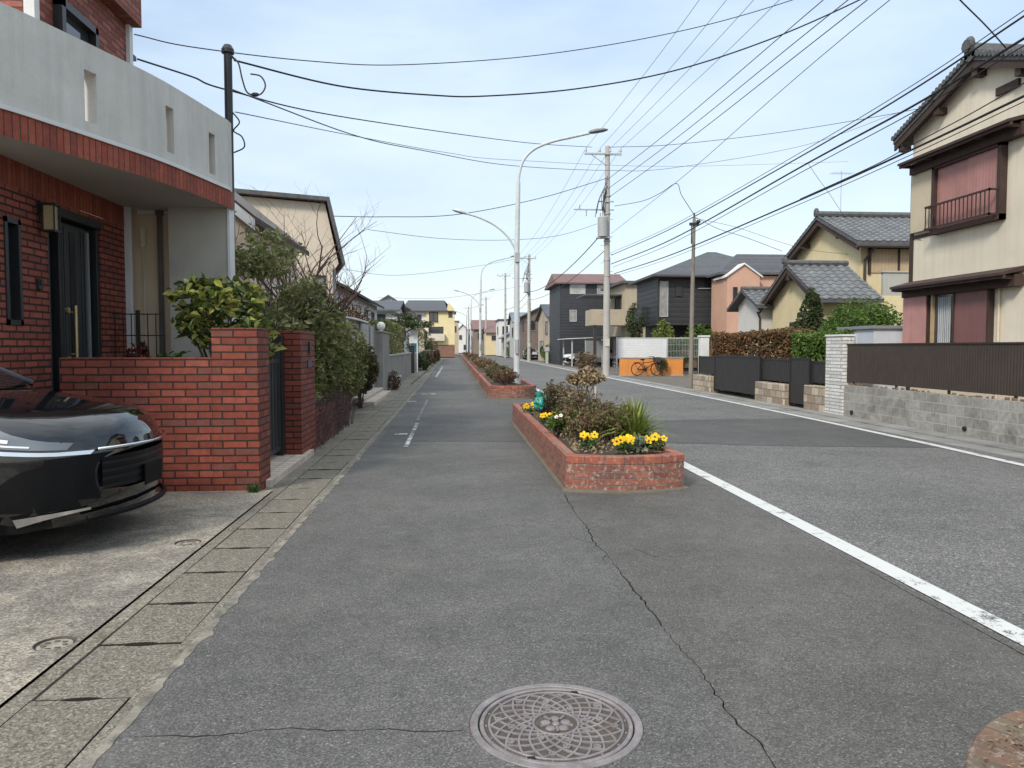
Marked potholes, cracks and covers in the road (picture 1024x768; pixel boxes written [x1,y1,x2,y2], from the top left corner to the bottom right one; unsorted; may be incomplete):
manhole cover [174,539,202,552]
manhole cover [470,683,643,768]
crack [144,727,462,737]
crack [565,495,776,768]
manhole cover [32,636,77,661]
